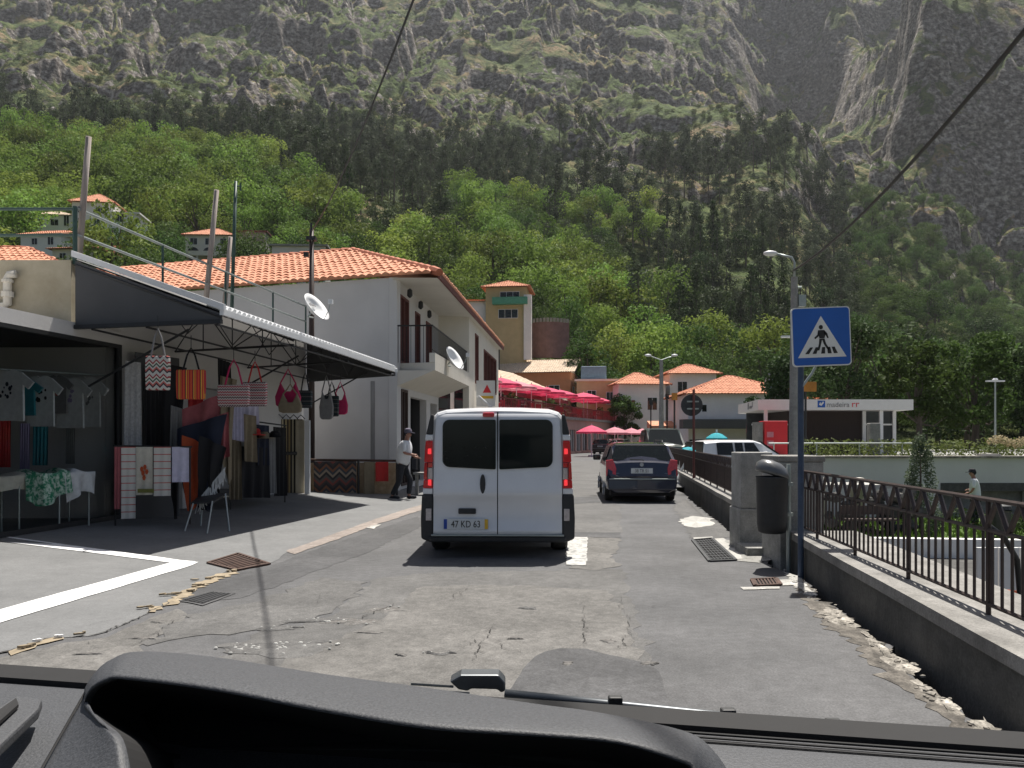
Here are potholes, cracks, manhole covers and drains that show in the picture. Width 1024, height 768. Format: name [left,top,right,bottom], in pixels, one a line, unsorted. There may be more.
drain grate [750,577,783,587]
drain grate [206,552,271,571]
drain grate [691,537,737,562]
